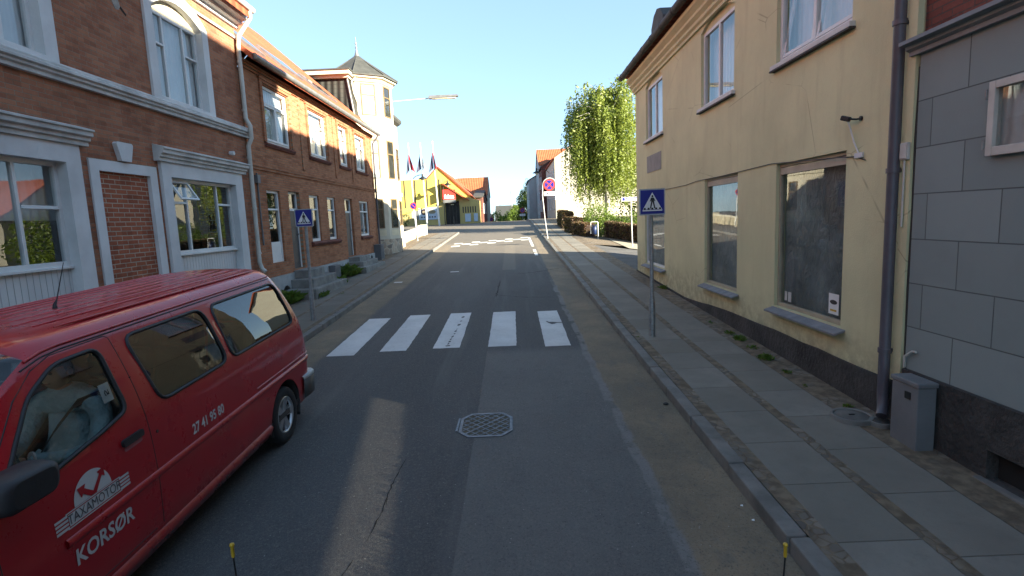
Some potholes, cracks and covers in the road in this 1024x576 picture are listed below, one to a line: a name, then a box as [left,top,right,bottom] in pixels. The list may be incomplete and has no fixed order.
crack [367,459,406,540]
manhole cover [830,407,874,426]
